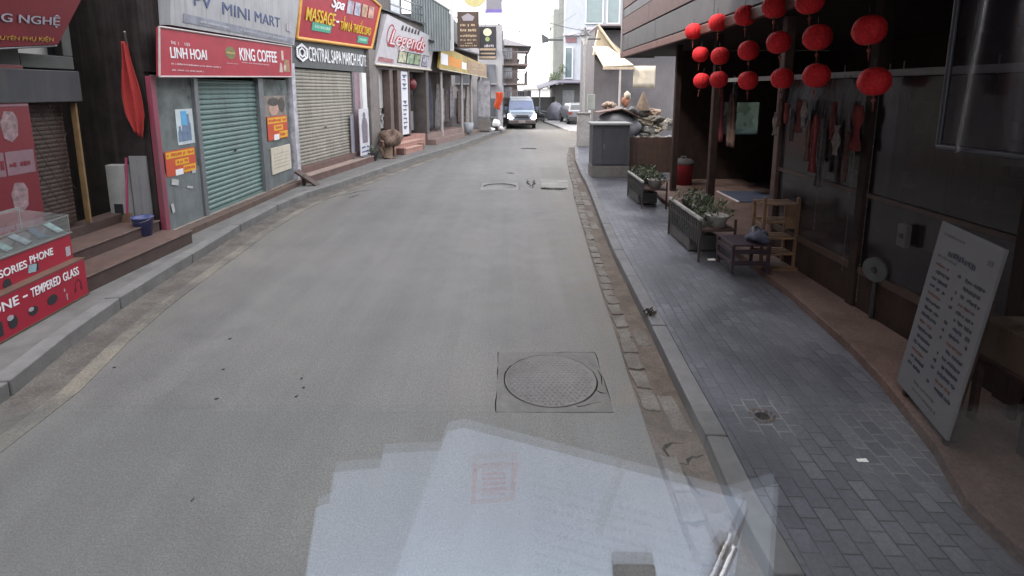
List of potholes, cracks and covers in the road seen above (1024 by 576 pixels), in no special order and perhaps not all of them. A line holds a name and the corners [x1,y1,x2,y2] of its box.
manhole cover [496,352,614,413]
crack [662,442,705,496]
